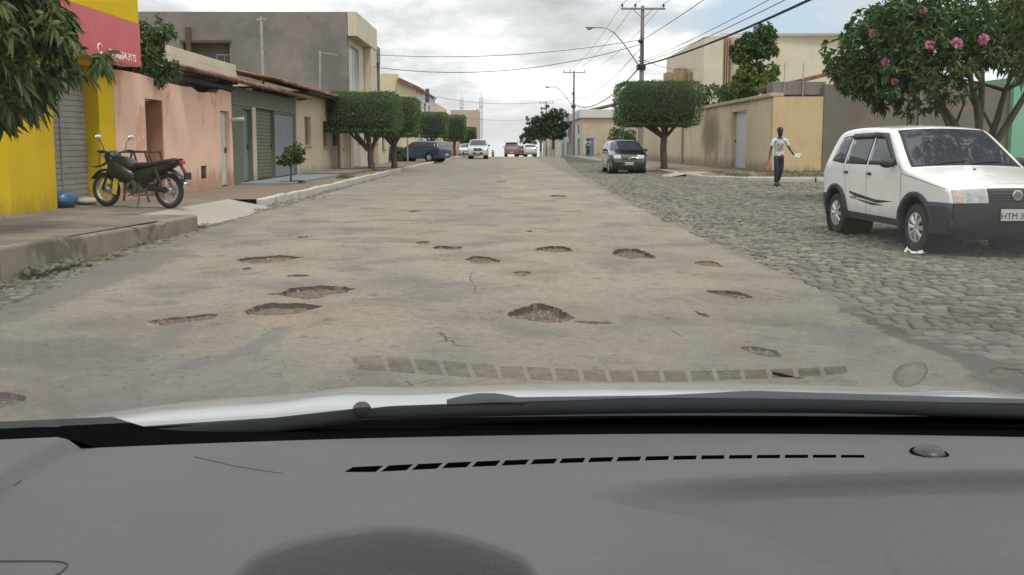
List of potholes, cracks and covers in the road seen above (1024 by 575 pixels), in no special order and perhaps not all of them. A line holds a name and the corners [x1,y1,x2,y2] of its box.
pothole [740,346,782,357]
pothole [0,392,27,409]
pothole [236,303,322,316]
pothole [706,290,756,299]
pothole [988,367,1024,378]
pothole [145,314,218,327]
crack [419,333,468,353]
pothole [465,256,502,264]
pothole [235,255,302,264]
pothole [612,248,656,259]
pothole [266,285,355,301]
pothole [507,303,576,323]
